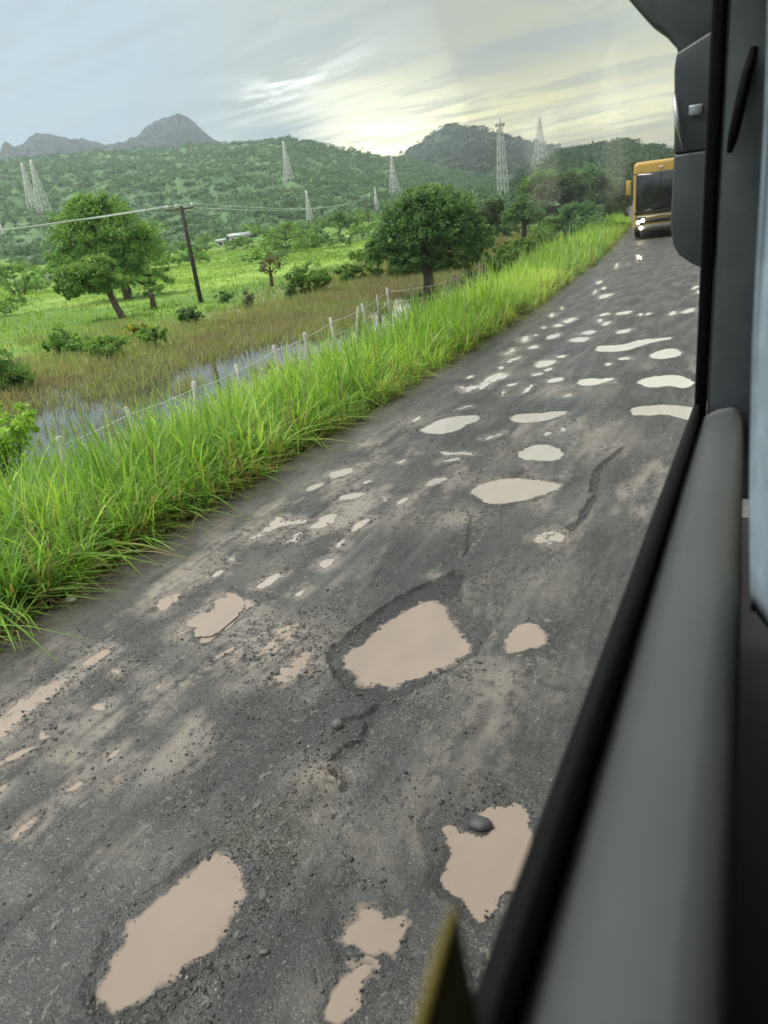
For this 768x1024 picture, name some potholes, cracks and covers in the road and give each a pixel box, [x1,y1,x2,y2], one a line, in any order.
pothole [490,612,573,658]
pothole [512,439,566,461]
pothole [415,411,488,436]
pothole [190,586,282,646]
pothole [77,836,303,1024]
pothole [321,864,421,967]
pothole [324,570,493,704]
pothole [461,469,583,506]
pothole [627,402,693,420]
pothole [414,766,539,932]
pothole [630,372,696,389]
crack [462,510,473,557]
